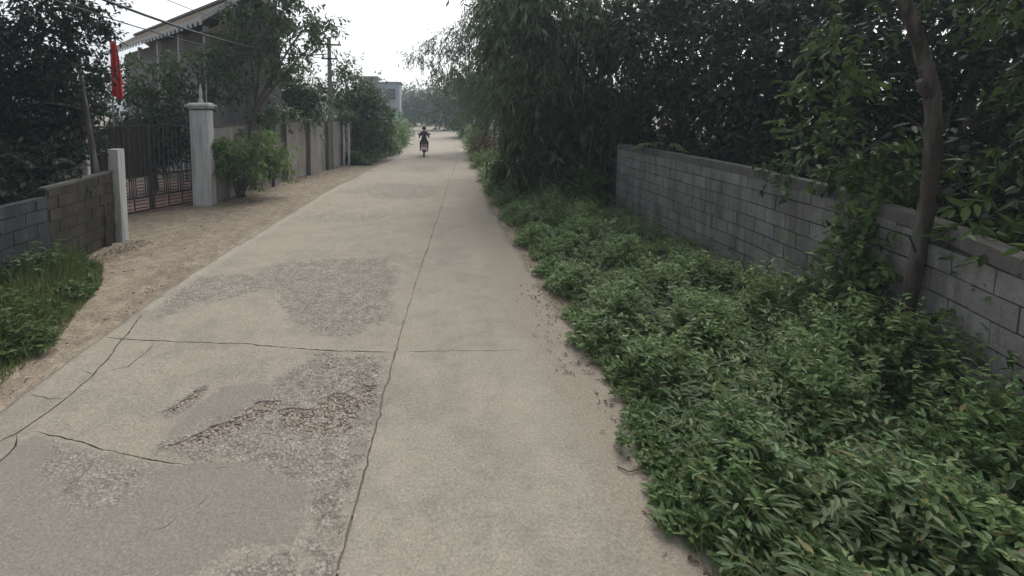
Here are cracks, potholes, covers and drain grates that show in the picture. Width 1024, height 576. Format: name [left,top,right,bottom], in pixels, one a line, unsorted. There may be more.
pothole [354,384,377,405]
pothole [168,400,281,448]
pothole [278,393,361,437]
crack [0,147,505,576]
pothole [163,386,206,414]
